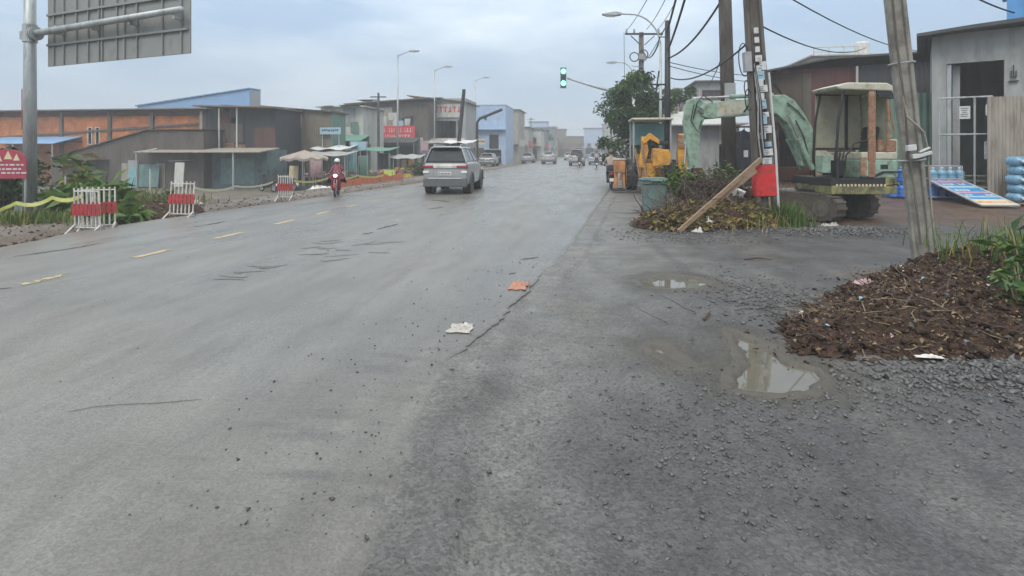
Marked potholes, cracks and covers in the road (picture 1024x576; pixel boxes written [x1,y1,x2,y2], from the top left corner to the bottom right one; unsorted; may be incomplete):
crack [212,264,281,280]
crack [68,399,201,412]
pothole [632,273,718,290]
pothole [663,327,837,399]
